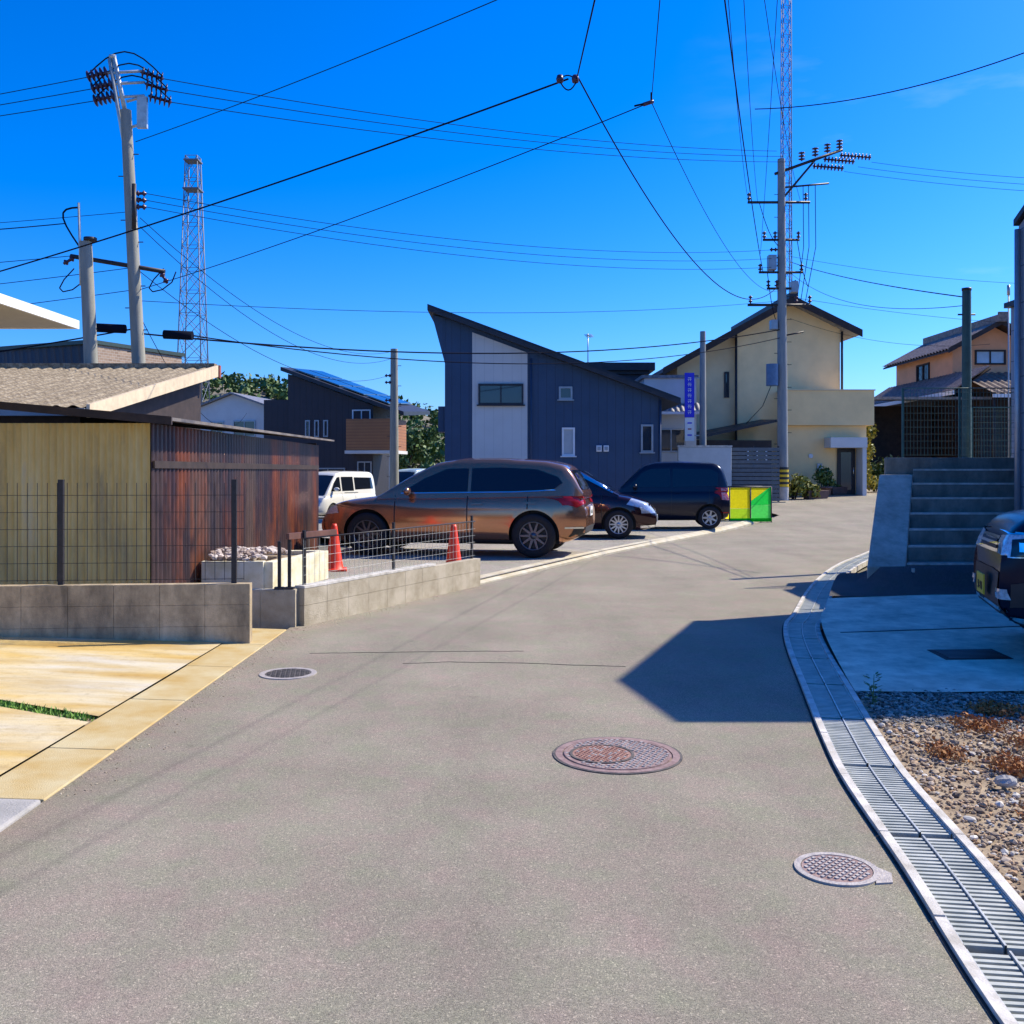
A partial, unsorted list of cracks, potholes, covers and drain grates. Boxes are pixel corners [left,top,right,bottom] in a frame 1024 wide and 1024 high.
manhole cover [794,852,893,887]
manhole cover [553,737,683,775]
manhole cover [259,667,317,680]
